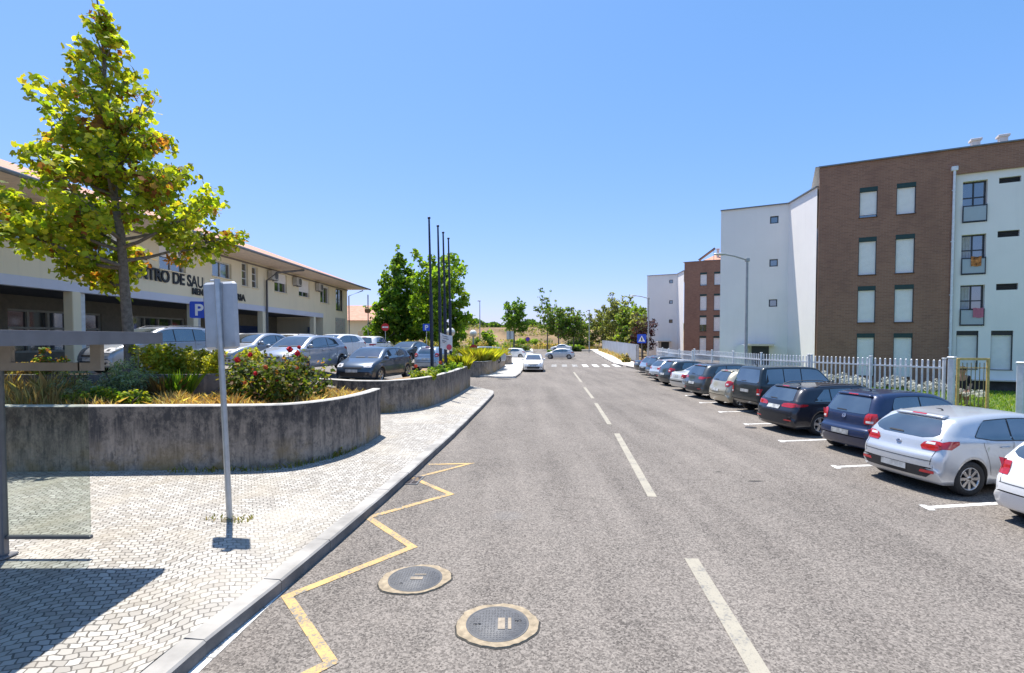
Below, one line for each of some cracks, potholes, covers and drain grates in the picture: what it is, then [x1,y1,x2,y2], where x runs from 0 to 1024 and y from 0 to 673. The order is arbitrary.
manhole cover [377,564,453,595]
manhole cover [455,603,541,649]
drain grate [404,476,425,485]
